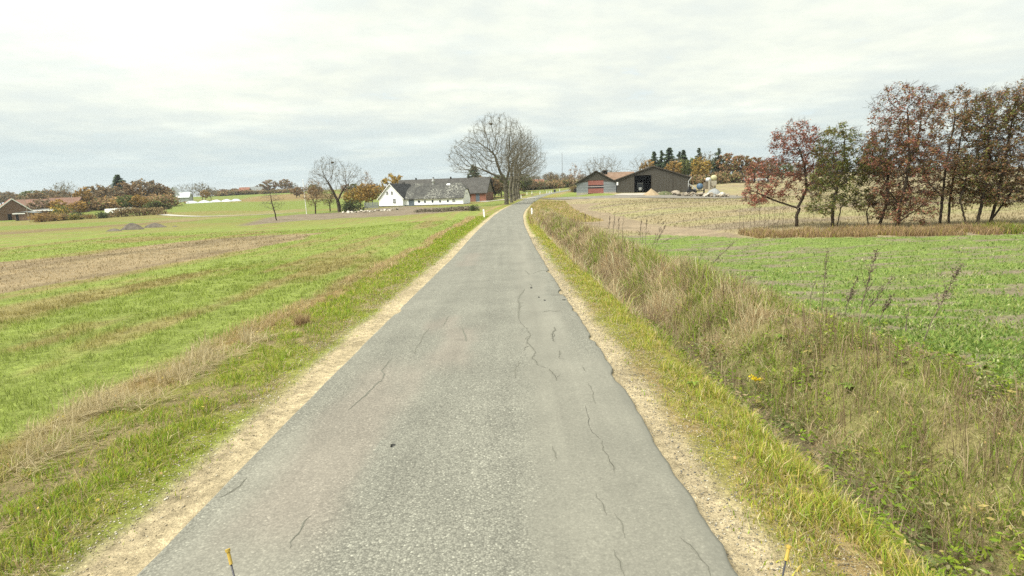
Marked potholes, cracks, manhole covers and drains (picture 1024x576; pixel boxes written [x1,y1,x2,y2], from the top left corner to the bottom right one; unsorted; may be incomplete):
crack [680,537,711,576]
crack [514,263,564,381]
crack [348,360,391,410]
crack [596,494,625,574]
crack [289,516,310,547]
crack [582,367,615,470]
crack [414,316,467,353]
